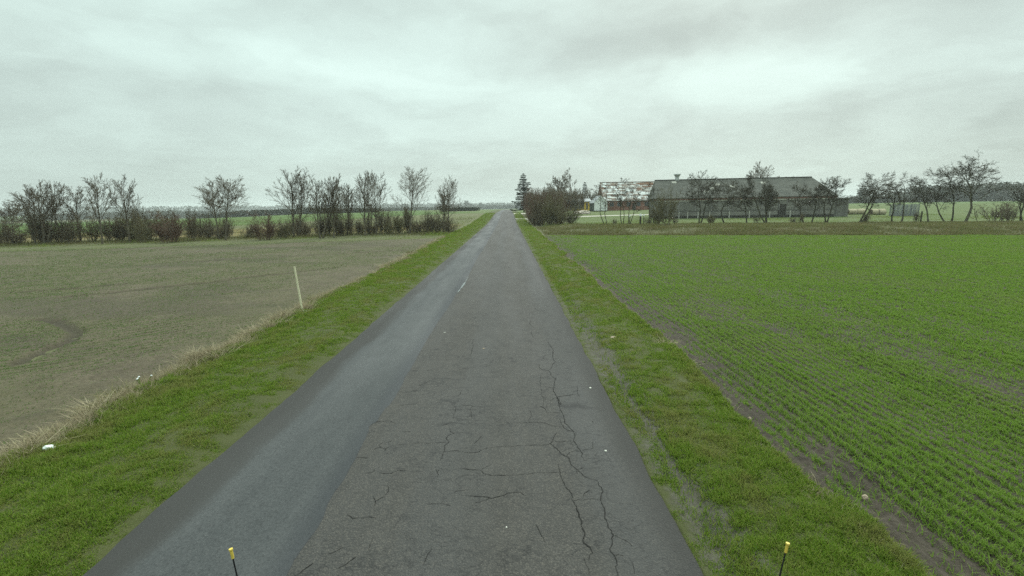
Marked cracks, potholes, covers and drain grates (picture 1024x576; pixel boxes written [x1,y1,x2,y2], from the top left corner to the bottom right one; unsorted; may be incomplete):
crack [375,341,635,573]
